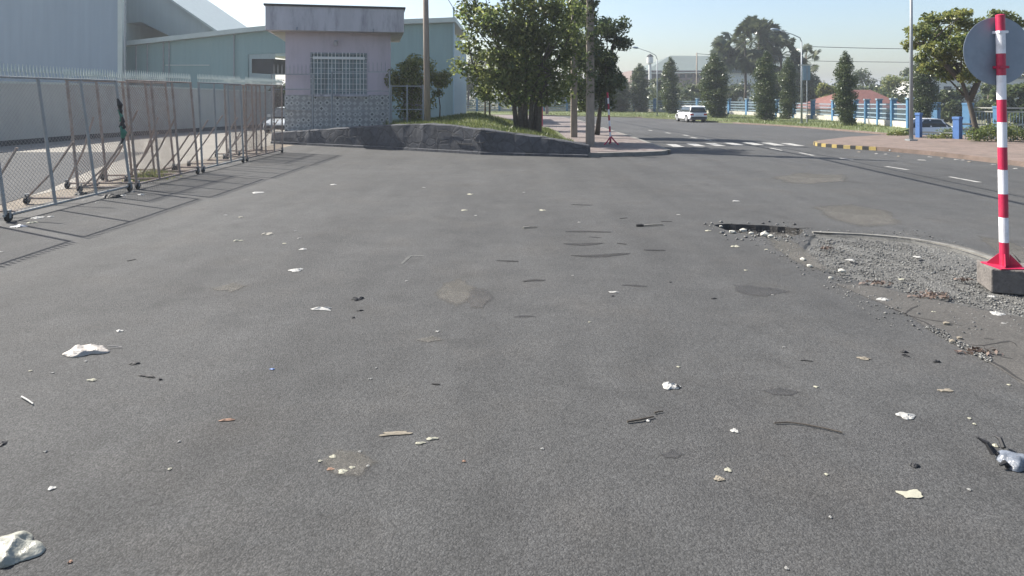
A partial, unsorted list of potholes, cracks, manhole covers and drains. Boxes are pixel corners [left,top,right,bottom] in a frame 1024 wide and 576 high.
pothole [715,224,803,239]
crack [894,305,1024,381]
